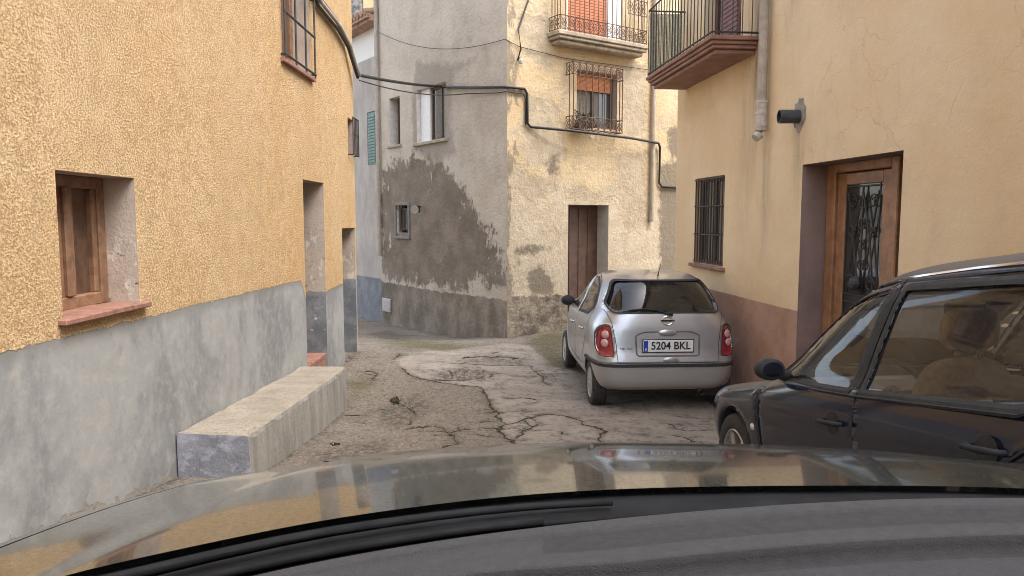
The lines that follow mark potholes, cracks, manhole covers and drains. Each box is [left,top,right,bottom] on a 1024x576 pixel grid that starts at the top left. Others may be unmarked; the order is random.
crack [342,352,608,448]
pothole [436,369,498,381]
crack [669,416,706,443]
